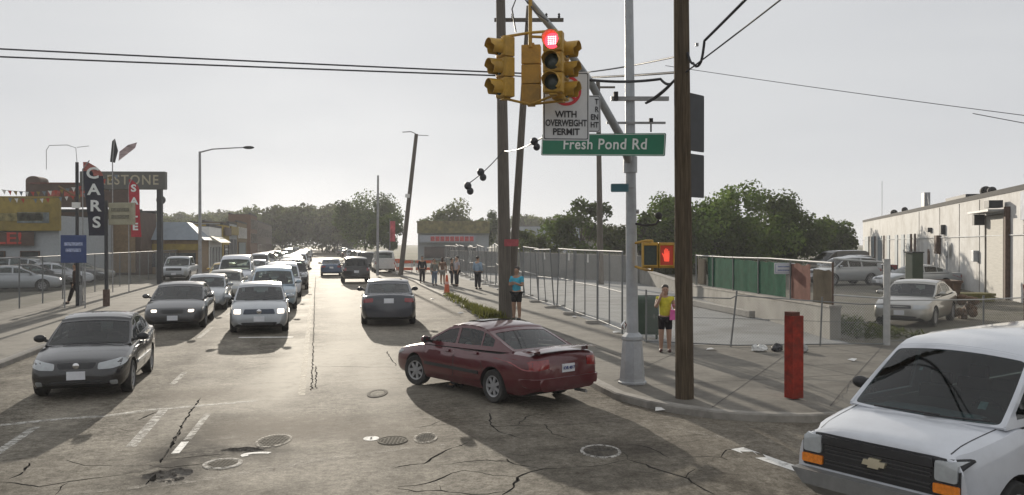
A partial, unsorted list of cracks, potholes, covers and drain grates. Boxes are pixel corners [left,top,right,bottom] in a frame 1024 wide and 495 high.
crack [472,413,599,440]
manhole cover [367,389,388,398]
manhole cover [580,444,620,458]
manhole cover [256,434,292,448]
manhole cover [414,432,438,443]
pothole [141,468,193,483]
manhole cover [377,436,408,445]
manhole cover [202,458,242,469]
crack [395,443,758,495]
crack [6,454,218,495]
